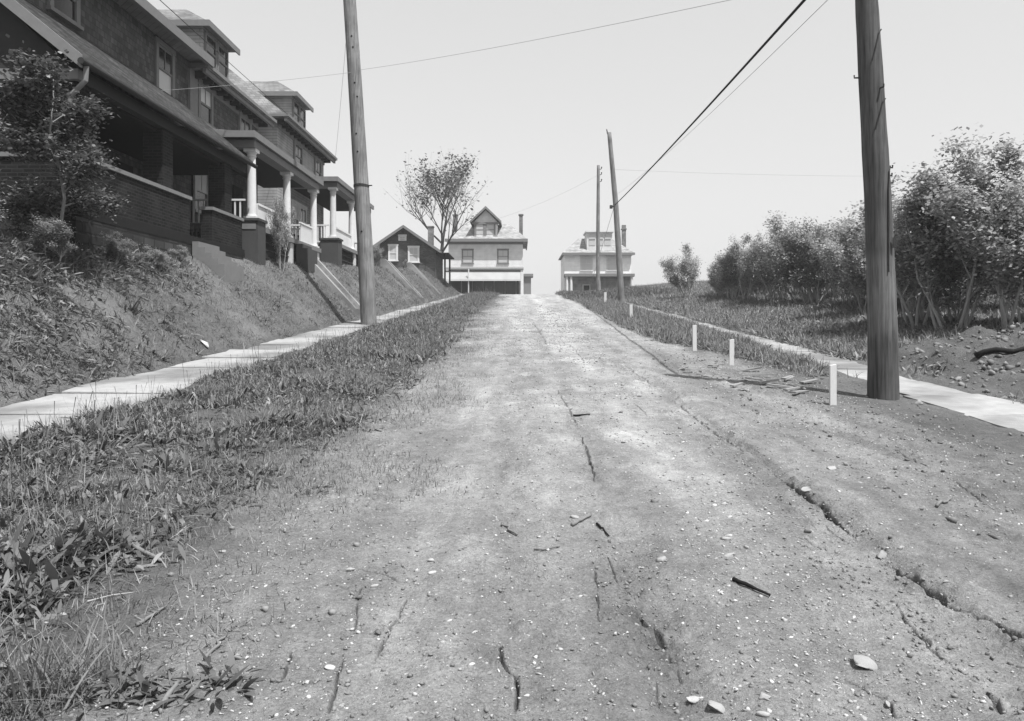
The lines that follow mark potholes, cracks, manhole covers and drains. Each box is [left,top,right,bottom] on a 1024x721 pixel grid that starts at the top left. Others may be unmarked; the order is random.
crack [546,387,606,485]
crack [258,565,425,721]
crack [581,548,700,721]
crack [473,636,539,721]
crack [618,363,1024,721]
